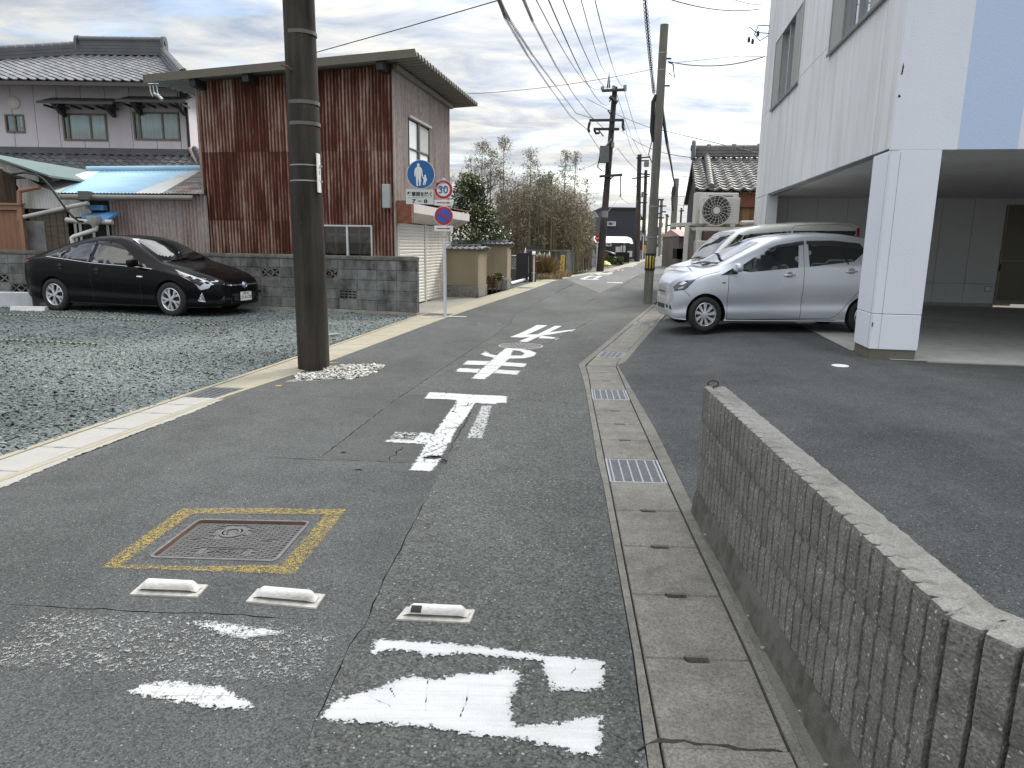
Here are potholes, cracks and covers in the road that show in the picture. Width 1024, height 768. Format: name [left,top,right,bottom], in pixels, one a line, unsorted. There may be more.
manhole cover [147,519,312,562]
crack [389,403,475,464]
drain grate [605,458,667,485]
crack [308,499,427,740]
drain grate [186,388,245,399]
drain grate [591,389,630,400]
